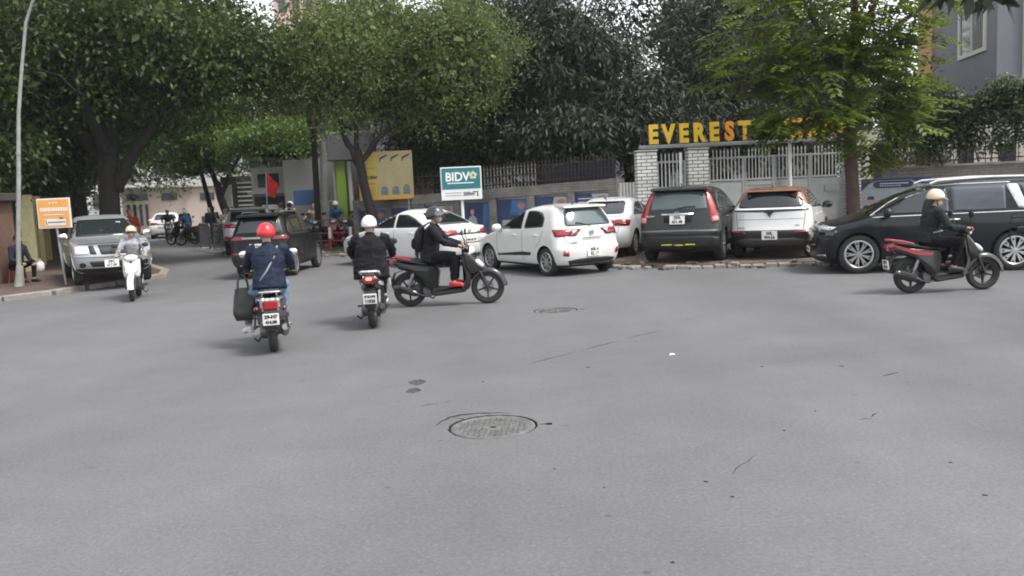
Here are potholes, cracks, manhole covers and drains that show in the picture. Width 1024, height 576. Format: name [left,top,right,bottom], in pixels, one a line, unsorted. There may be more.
manhole cover [448,415,552,439]
